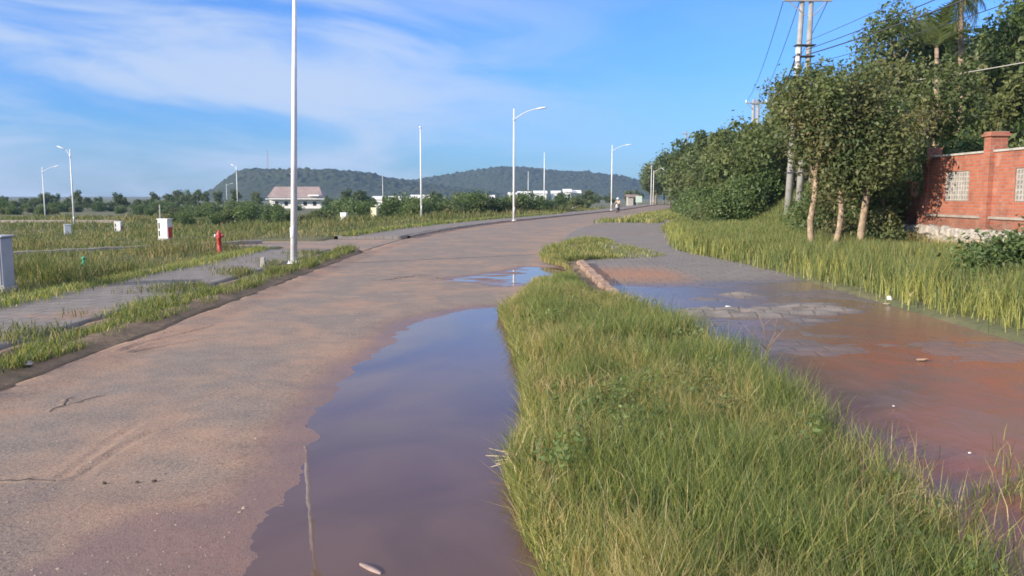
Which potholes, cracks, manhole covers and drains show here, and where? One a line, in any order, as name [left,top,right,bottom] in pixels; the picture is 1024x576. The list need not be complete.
crack [48,395,107,413]
